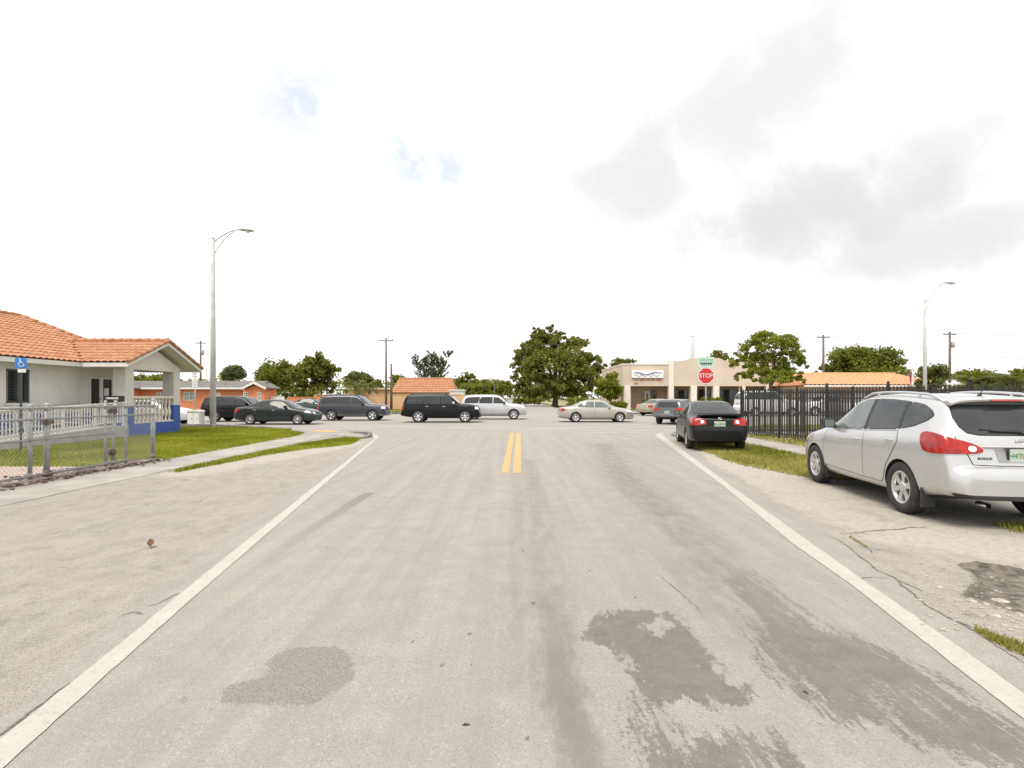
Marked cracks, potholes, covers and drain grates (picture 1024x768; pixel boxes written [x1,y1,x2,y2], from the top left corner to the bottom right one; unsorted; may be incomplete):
crack [832,536,1023,662]
